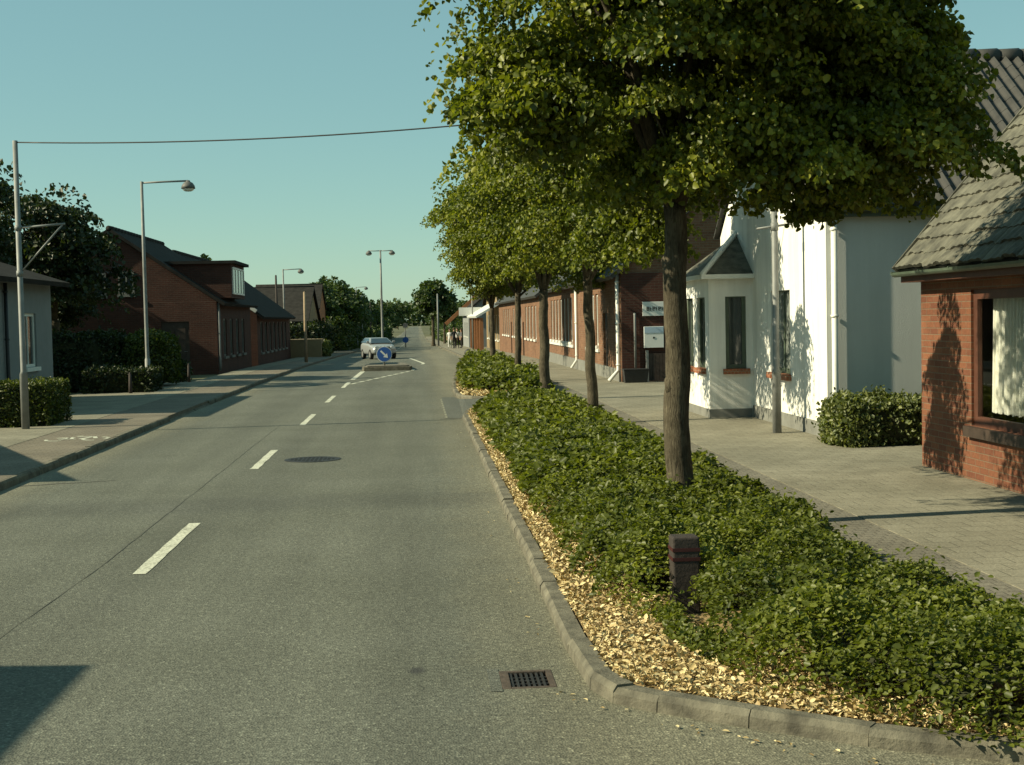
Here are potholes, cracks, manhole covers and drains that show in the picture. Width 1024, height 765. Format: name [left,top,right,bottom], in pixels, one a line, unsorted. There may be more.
drain grate [486,669,557,692]
